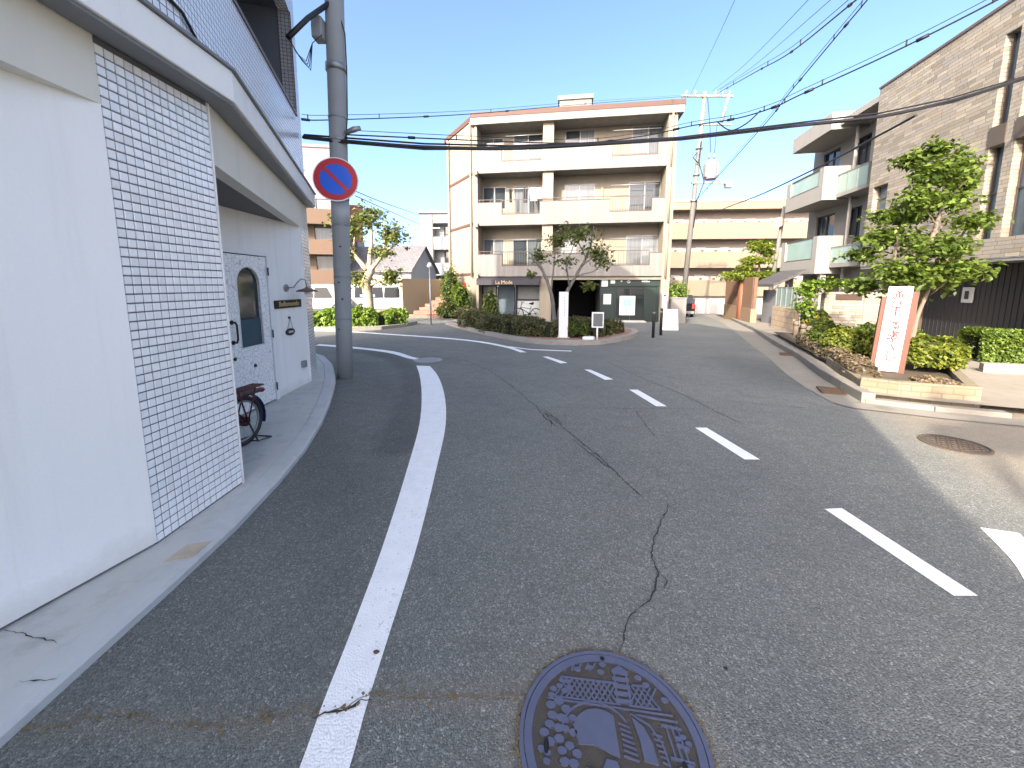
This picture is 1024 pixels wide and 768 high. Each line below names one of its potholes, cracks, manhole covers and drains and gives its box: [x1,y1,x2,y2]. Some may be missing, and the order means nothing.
drain grate [816,386,847,395]
manhole cover [917,434,995,456]
manhole cover [513,646,719,768]
crack [619,502,672,650]
crack [448,358,643,497]
